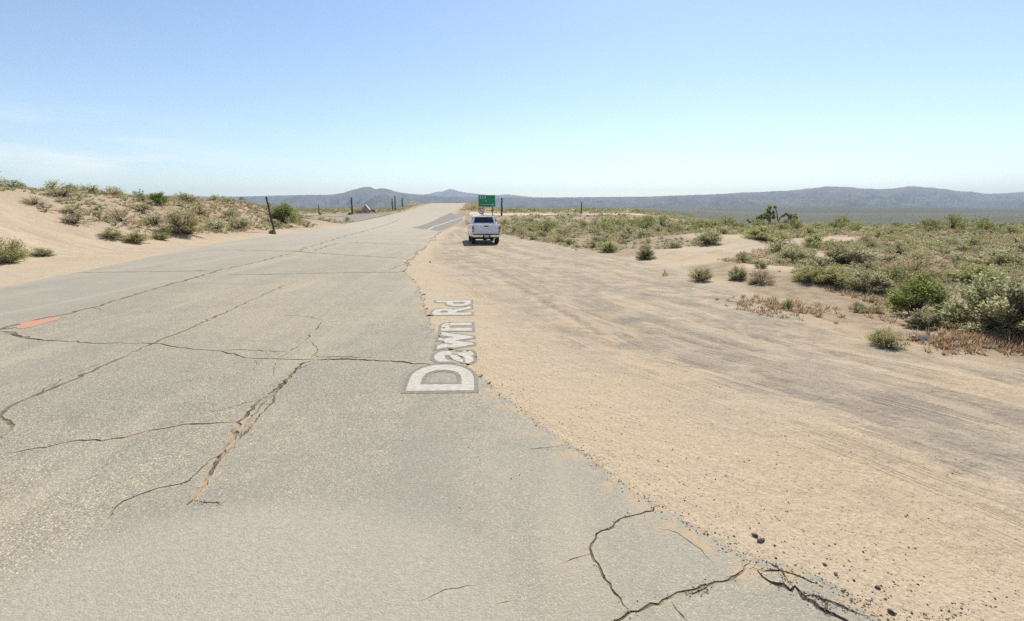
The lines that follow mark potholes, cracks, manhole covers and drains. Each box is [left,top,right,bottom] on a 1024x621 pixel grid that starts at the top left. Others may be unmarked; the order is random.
crack [0,220,427,520]
crack [568,505,869,621]
